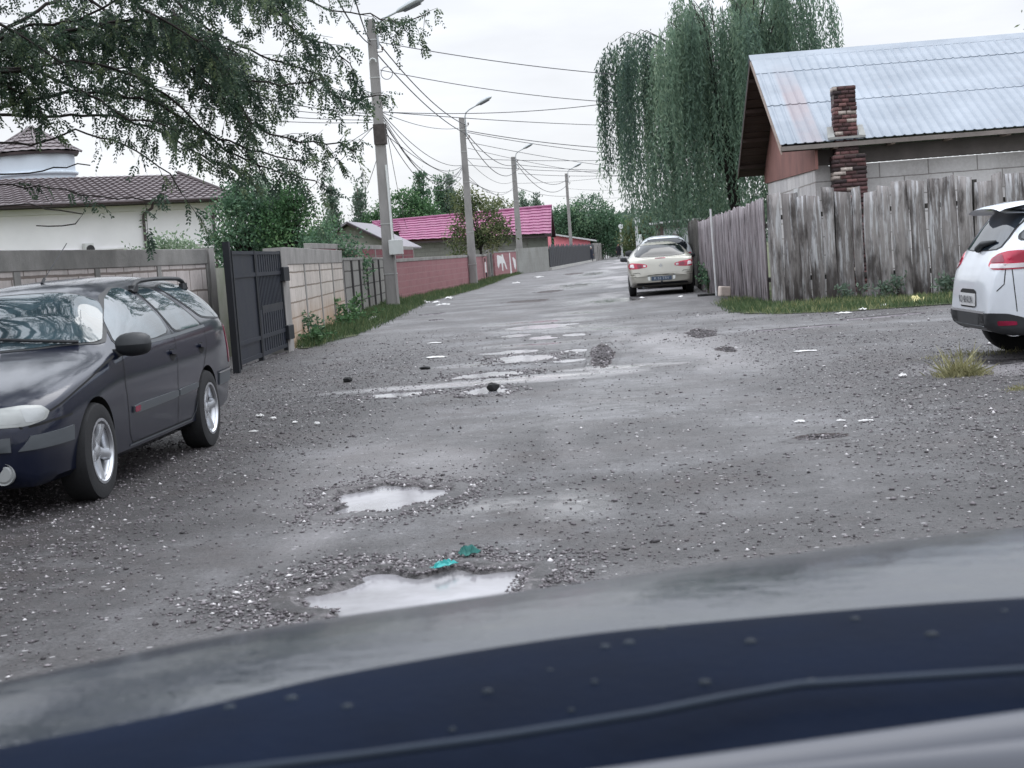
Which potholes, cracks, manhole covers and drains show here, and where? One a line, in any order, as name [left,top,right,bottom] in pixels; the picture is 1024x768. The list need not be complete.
pothole [486,354,567,365]
pothole [778,433,864,444]
pothole [706,345,743,354]
pothole [309,479,469,521]
pothole [350,390,437,400]
pothole [679,327,722,340]
pothole [266,557,557,621]
pothole [442,370,537,381]
